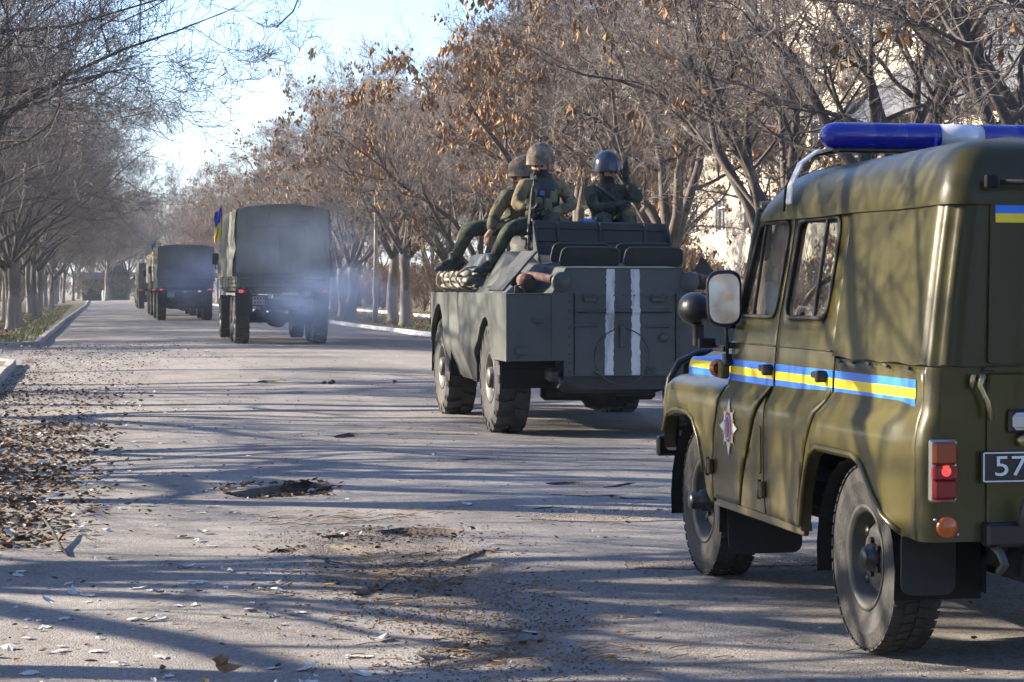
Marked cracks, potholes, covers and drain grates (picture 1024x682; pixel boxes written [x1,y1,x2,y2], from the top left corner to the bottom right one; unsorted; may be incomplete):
pothole [375,527,464,538]
crack [534,483,658,509]
pothole [225,482,334,498]
